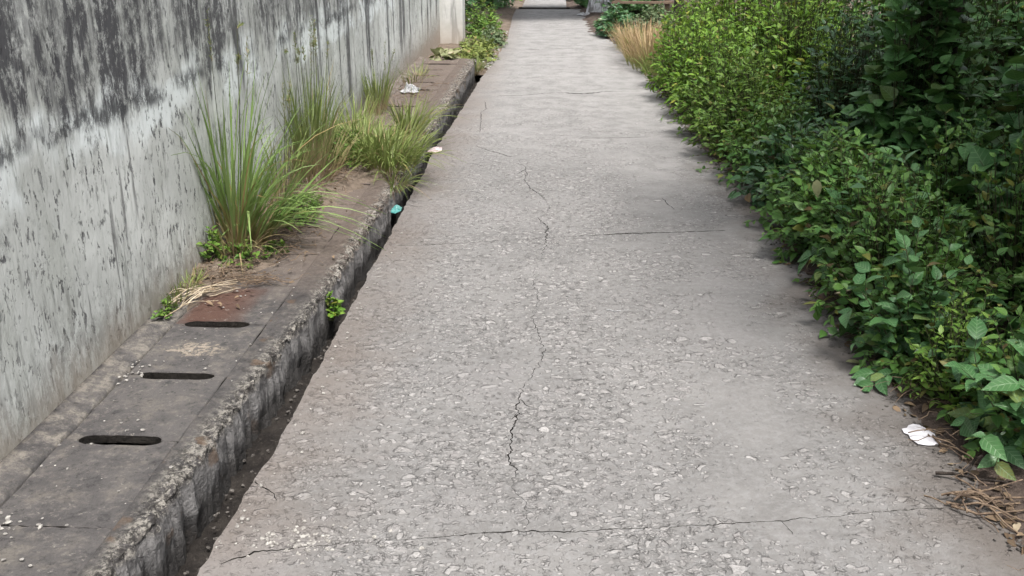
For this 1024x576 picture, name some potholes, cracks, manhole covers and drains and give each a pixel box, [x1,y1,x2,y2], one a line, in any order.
crack [220,102,951,564]
